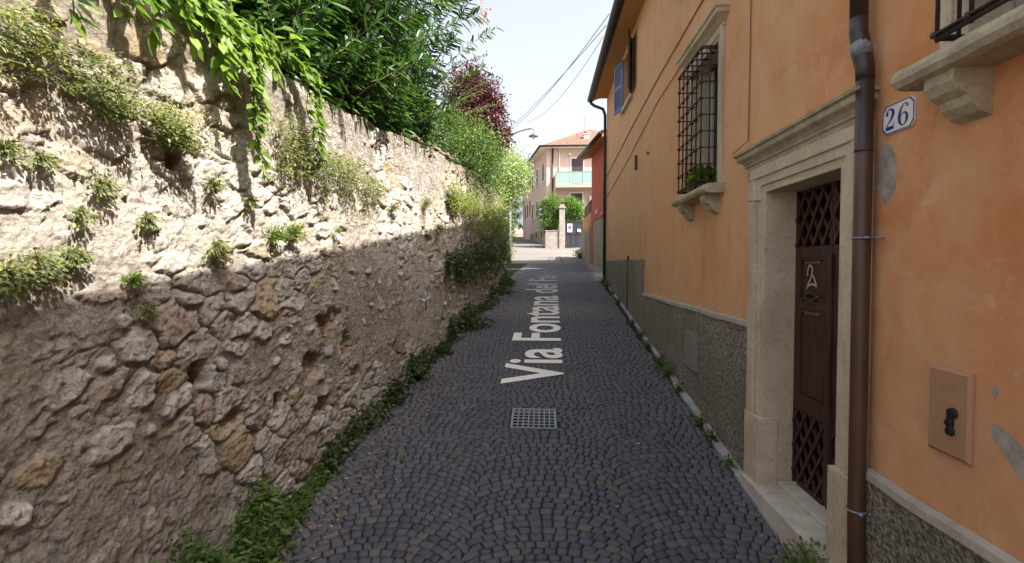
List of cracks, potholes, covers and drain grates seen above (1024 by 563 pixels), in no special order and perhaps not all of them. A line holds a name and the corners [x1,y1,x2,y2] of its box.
drain grate [510,408,557,430]
